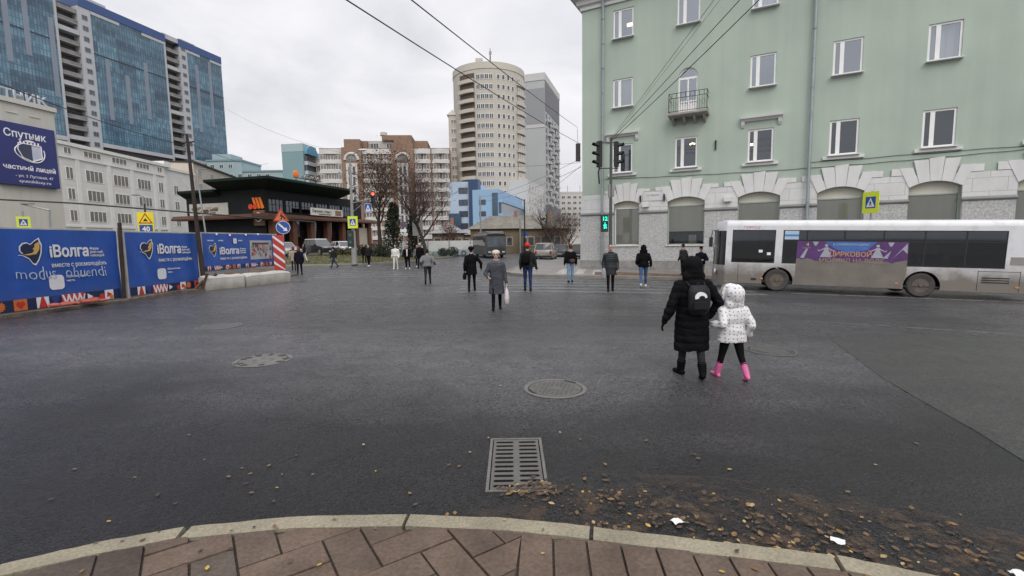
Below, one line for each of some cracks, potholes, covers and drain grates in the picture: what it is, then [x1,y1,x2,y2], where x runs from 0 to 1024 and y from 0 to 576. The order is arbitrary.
manhole cover [232,353,293,367]
manhole cover [744,345,800,356]
manhole cover [524,379,587,399]
drain grate [485,438,549,492]
